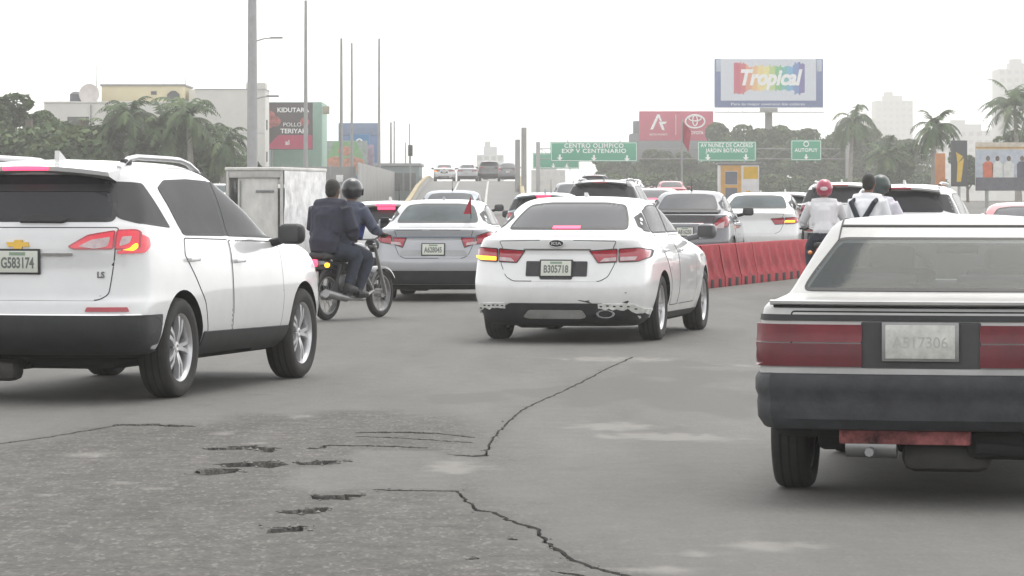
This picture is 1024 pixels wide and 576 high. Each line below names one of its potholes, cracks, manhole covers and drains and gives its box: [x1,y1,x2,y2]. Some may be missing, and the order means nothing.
pothole [275,506,332,515]
crack [372,487,631,576]
crack [0,424,196,444]
crack [306,357,633,457]
pothole [203,444,282,453]
pothole [292,458,353,466]
pothole [213,458,289,468]
pothole [258,523,316,534]
pothole [309,492,367,501]
